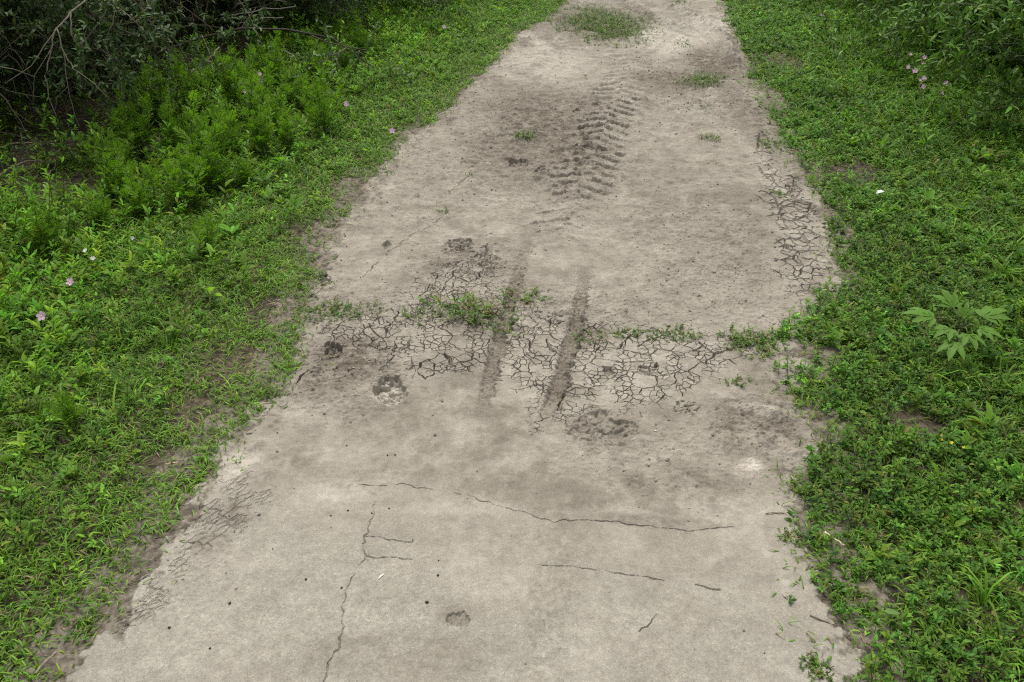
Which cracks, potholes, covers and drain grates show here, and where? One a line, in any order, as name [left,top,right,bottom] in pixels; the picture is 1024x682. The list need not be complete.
crack [360,212,448,278]
crack [112,458,273,636]
crack [322,483,734,682]
crack [748,130,832,297]
